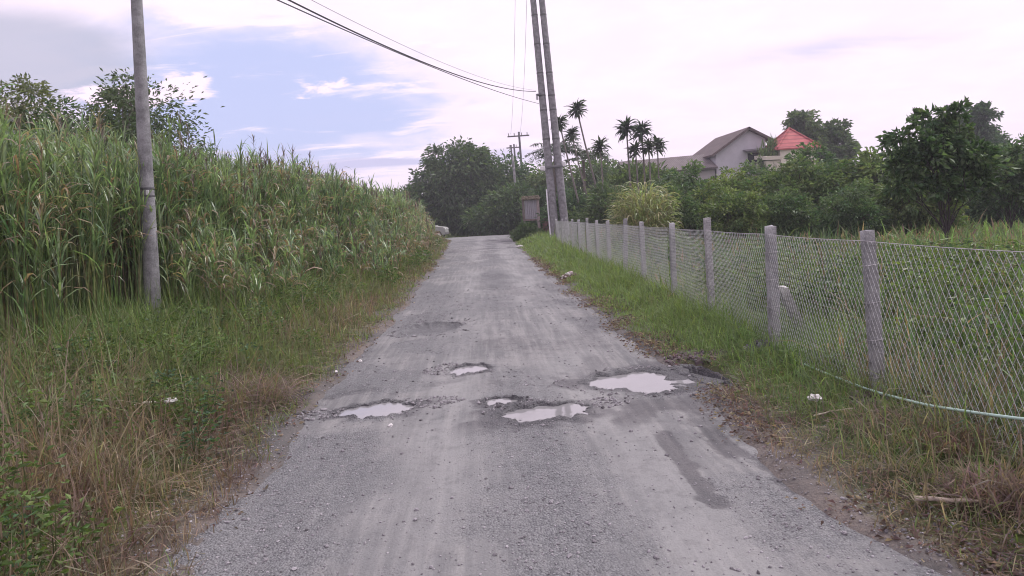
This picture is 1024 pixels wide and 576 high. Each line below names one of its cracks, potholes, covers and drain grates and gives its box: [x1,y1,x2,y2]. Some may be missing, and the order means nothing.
pothole [325,398,423,420]
pothole [479,394,528,407]
pothole [568,366,724,397]
pothole [489,399,600,427]
pothole [443,362,496,378]
pothole [396,320,471,336]
